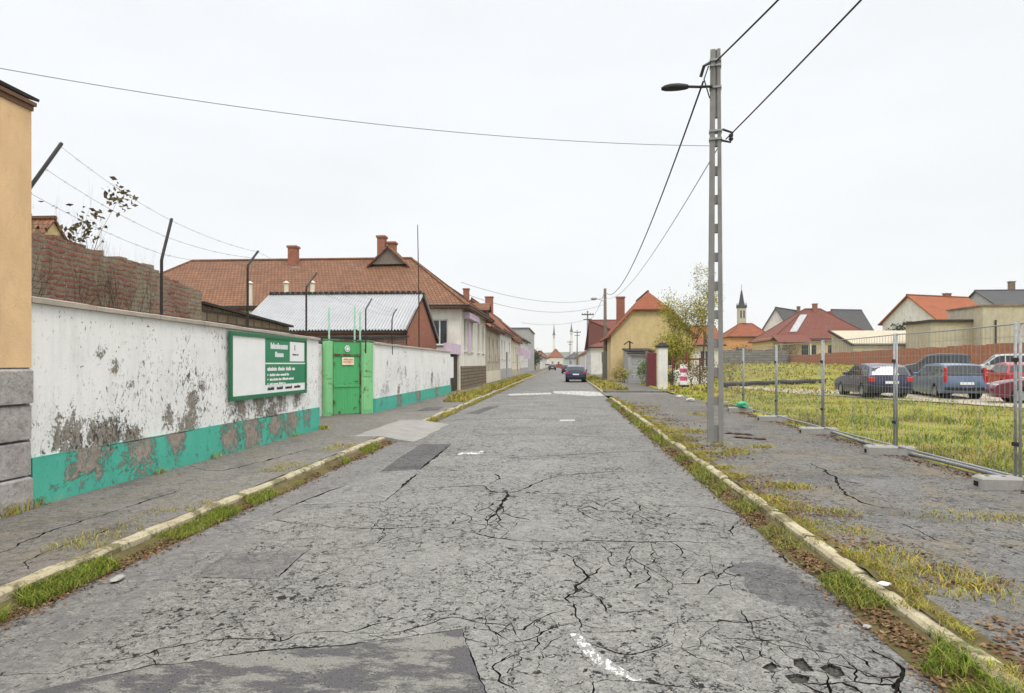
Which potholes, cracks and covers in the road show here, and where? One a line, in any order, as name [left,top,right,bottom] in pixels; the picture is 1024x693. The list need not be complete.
crack [0,444,906,693]
pothole [793,658,814,671]
crack [810,463,949,544]
pothole [784,674,810,684]
pothole [819,663,845,678]
